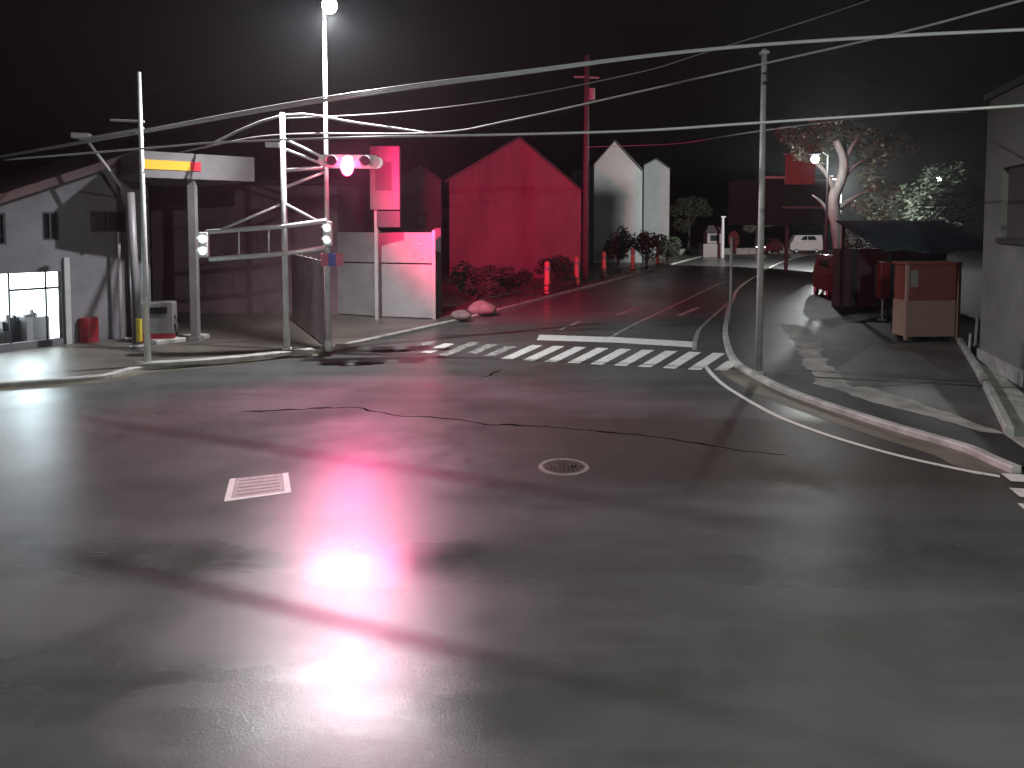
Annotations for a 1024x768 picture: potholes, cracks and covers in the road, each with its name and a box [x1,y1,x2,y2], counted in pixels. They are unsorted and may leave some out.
crack [245,407,782,455]
manhole cover [538,458,589,476]
